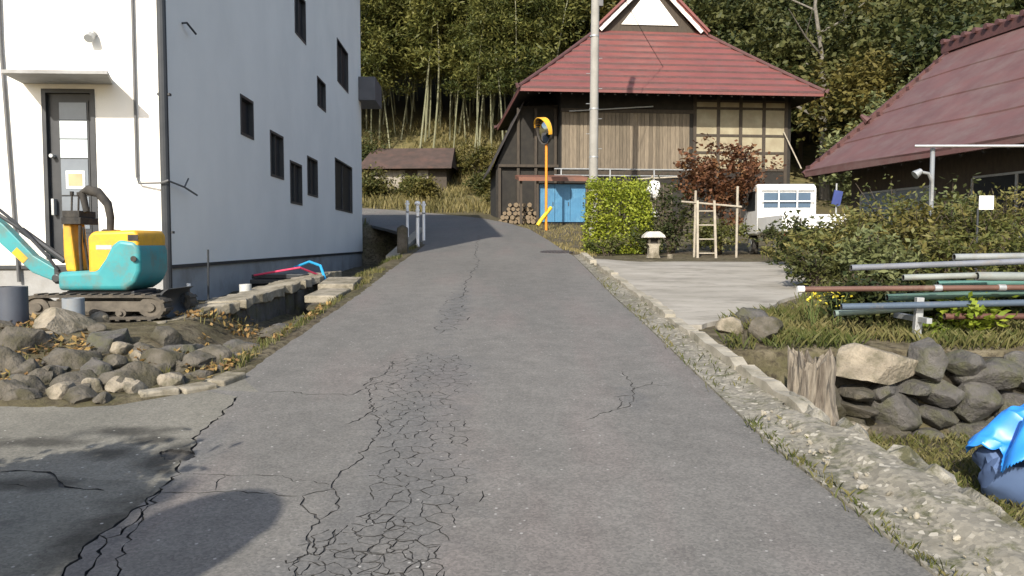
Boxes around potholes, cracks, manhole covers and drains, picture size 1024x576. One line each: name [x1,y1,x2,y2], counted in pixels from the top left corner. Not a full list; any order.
crack [6,470,103,491]
crack [148,352,474,576]
